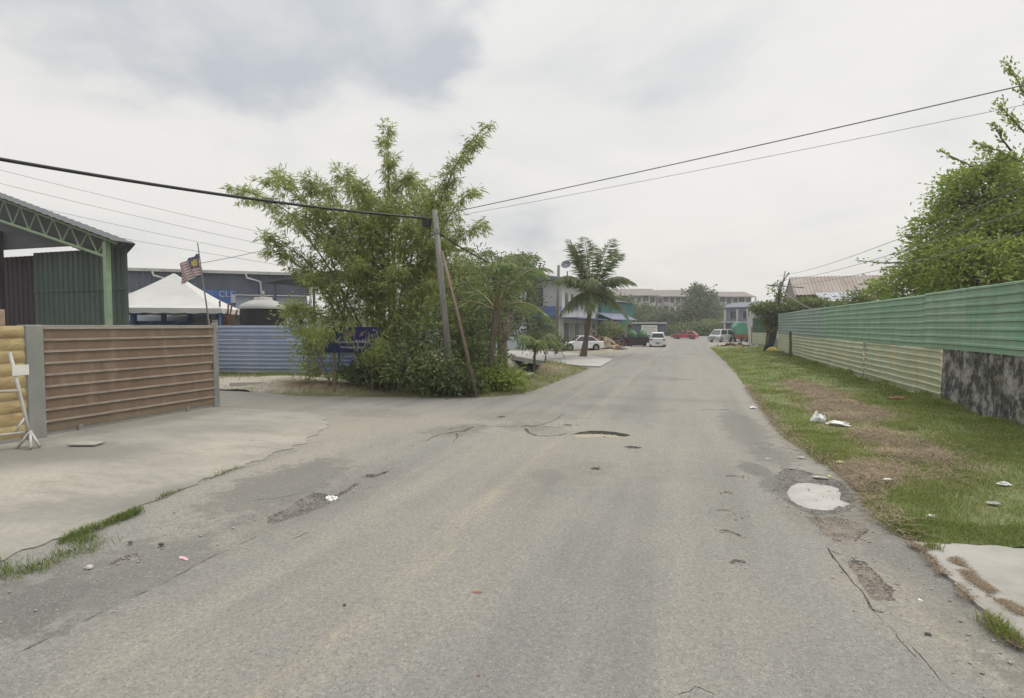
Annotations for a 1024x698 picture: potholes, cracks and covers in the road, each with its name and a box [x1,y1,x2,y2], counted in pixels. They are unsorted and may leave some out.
pothole [267,483,359,524]
crack [825,530,940,679]
pothole [847,559,896,601]
crack [423,413,567,442]
pothole [807,516,869,542]
